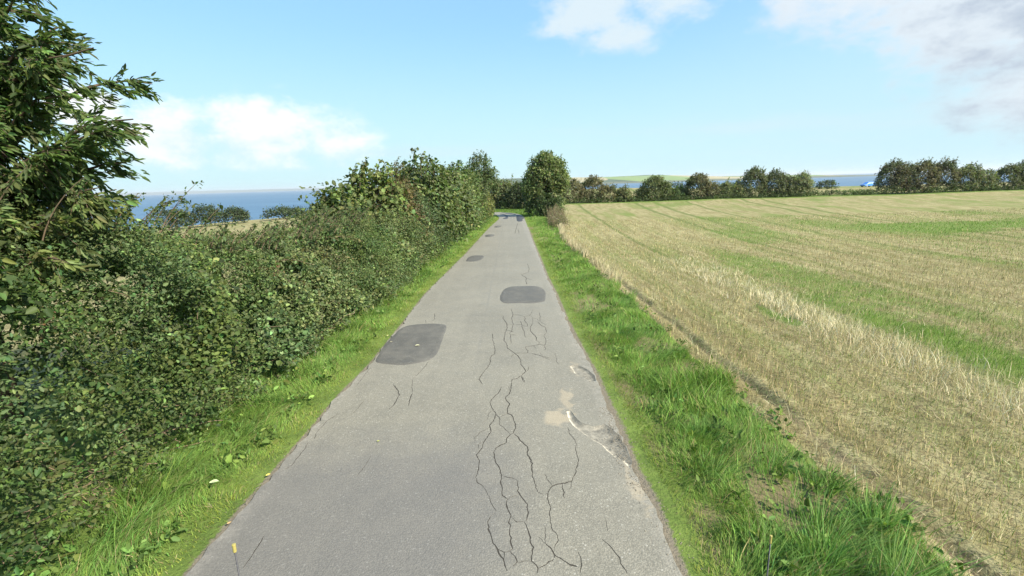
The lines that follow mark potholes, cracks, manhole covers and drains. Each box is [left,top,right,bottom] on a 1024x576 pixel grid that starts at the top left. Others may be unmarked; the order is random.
crack [476,310,582,573]
pothole [571,365,596,381]
pothole [567,411,632,468]
